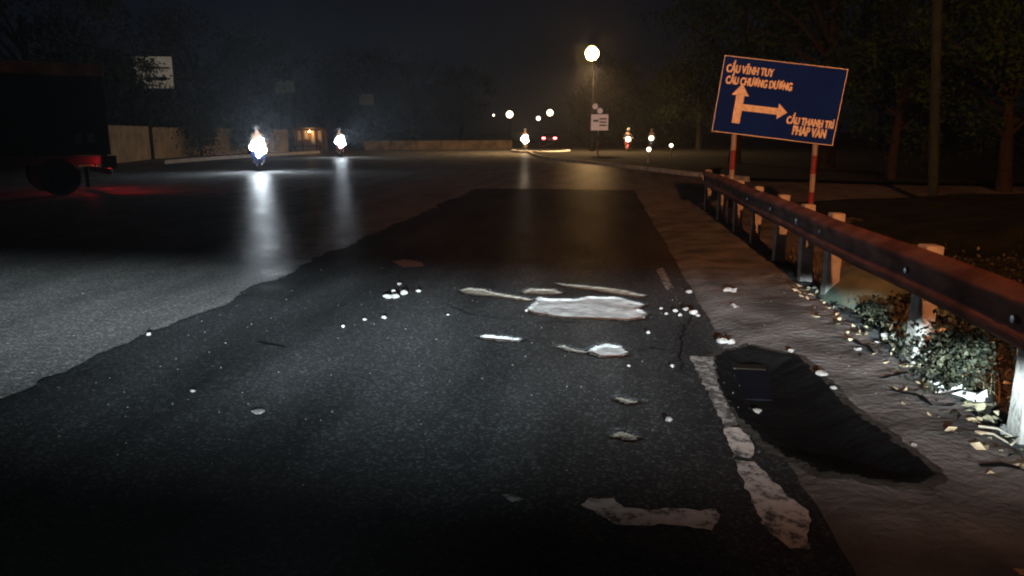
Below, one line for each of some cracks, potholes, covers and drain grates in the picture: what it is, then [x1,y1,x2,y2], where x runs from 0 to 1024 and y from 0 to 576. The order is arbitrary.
crack [639,314,694,373]
pothole [708,344,948,491]
